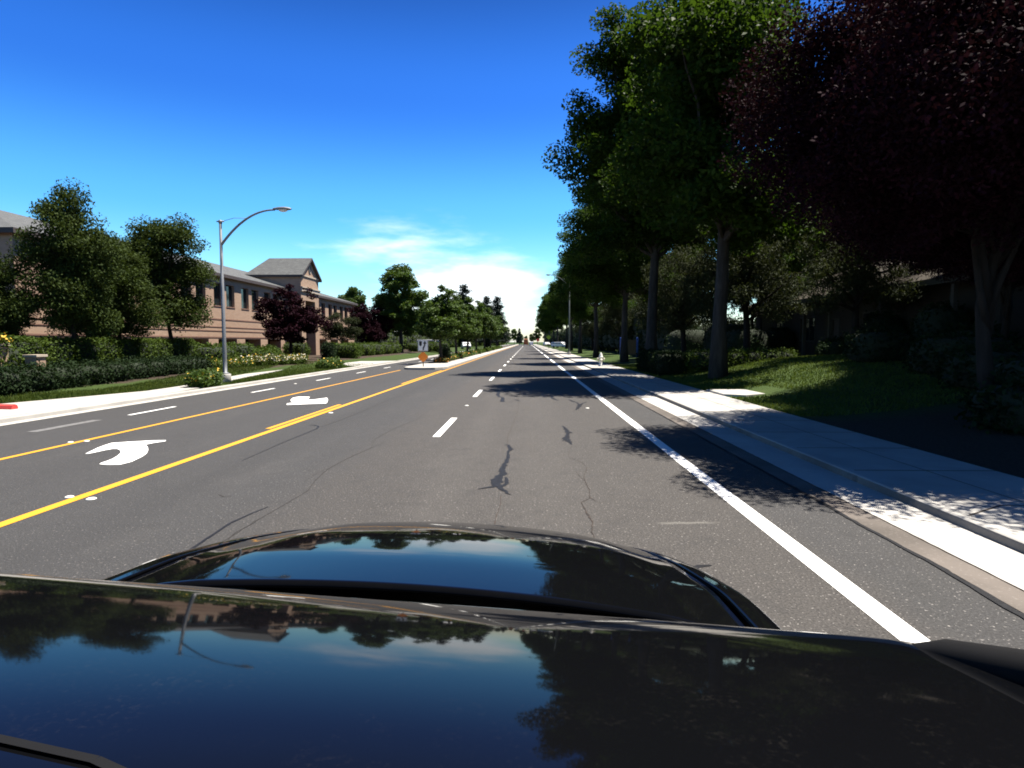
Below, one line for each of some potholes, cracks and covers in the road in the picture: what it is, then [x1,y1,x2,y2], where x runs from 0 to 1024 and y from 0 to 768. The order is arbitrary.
crack [225,416,421,540]
crack [568,449,595,538]
